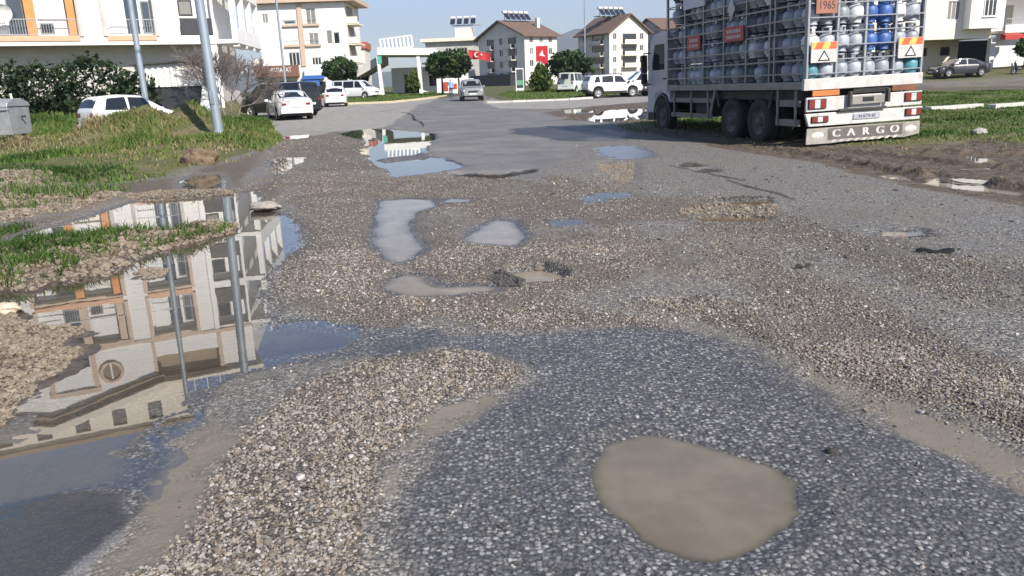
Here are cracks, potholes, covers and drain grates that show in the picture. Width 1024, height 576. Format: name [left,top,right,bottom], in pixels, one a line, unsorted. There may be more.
pothole [488,259,580,287]
pothole [447,216,541,248]
crack [671,165,794,199]
pothole [858,226,947,239]
pothole [556,420,847,576]
pothole [366,267,517,299]
pothole [358,195,448,265]
